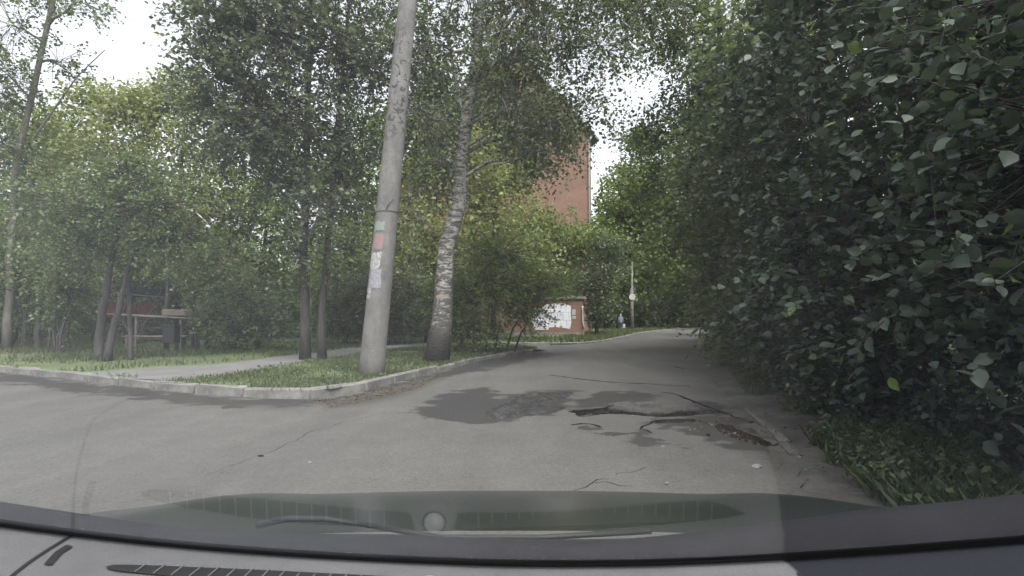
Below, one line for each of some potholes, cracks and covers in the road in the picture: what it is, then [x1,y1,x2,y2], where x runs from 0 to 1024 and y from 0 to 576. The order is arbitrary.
crack [552,366,739,426]
pothole [568,402,722,417]
pothole [715,423,773,447]
